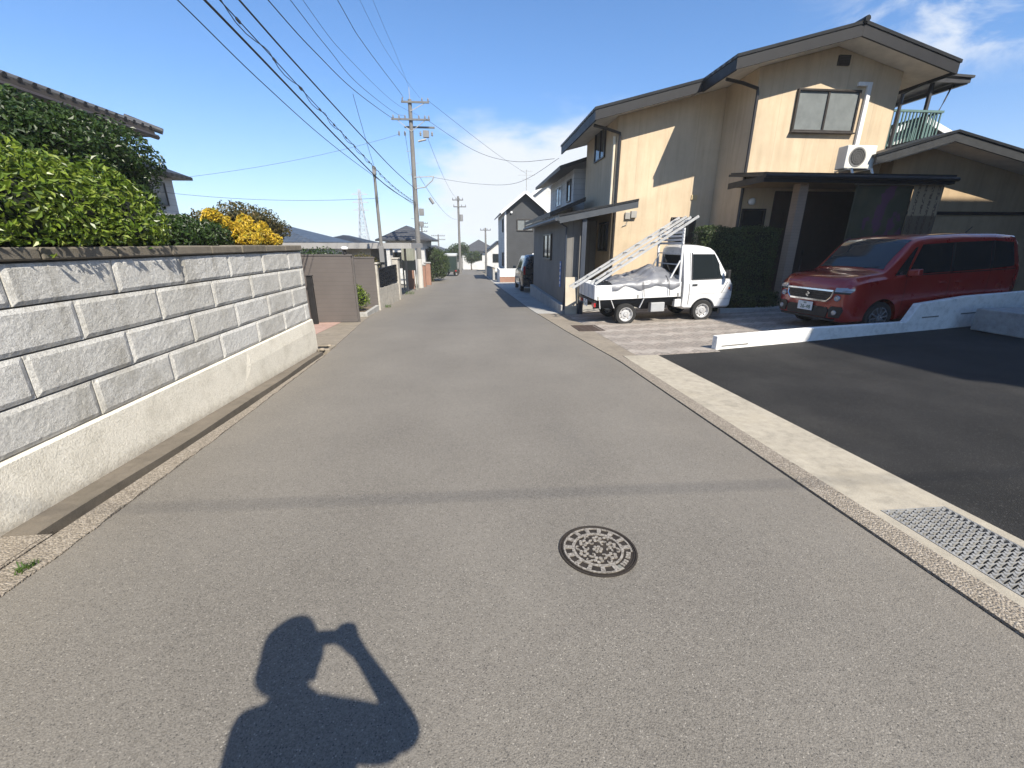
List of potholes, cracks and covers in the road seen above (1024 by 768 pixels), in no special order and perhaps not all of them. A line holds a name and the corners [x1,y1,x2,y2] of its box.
drain grate [881,506,1024,598]
manhole cover [559,526,638,578]
